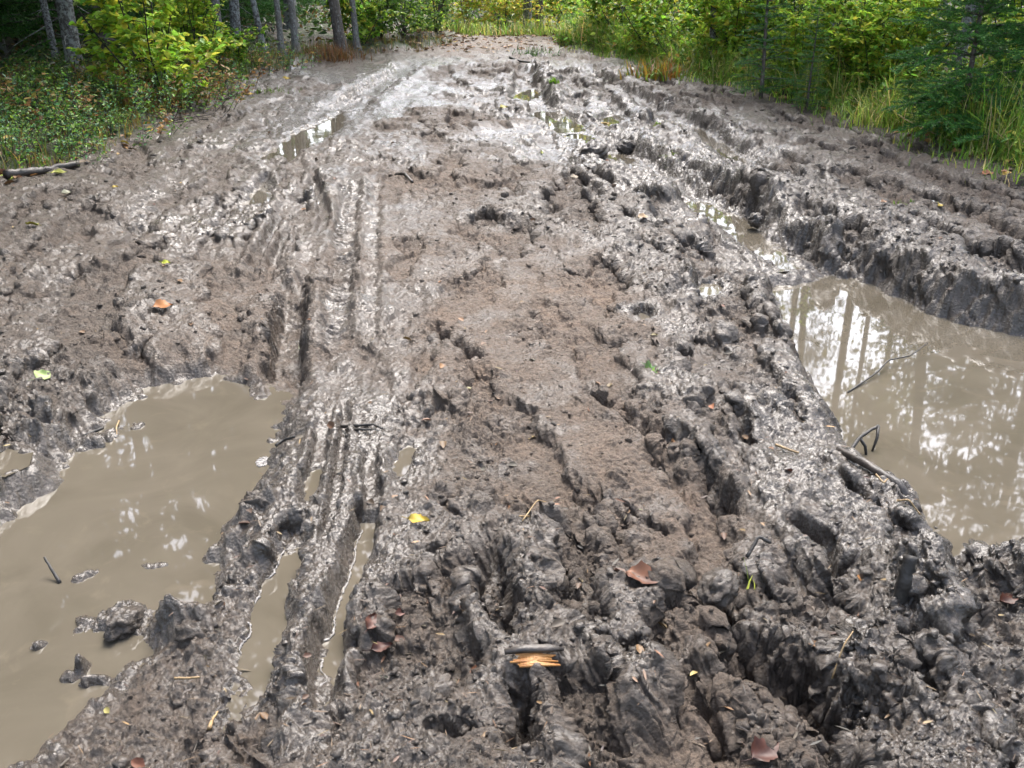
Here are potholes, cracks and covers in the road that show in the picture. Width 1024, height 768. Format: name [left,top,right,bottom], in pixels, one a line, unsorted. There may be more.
pothole [0,349,315,768]
pothole [749,221,1024,556]
pothole [255,110,351,163]
